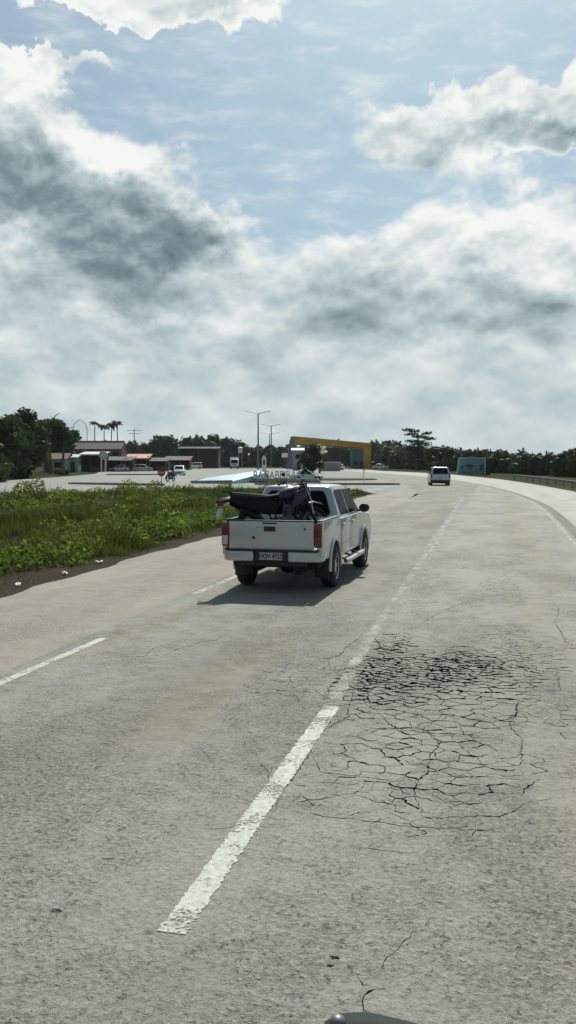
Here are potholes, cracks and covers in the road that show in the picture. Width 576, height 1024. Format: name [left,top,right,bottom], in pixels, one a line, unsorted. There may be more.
crack [239,624,576,840]
crack [358,929,415,1012]
